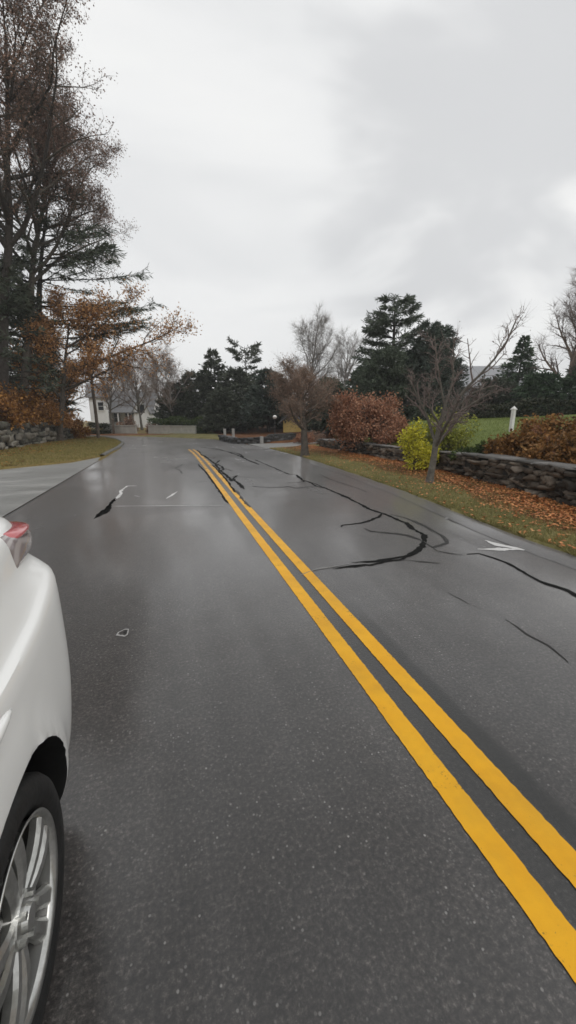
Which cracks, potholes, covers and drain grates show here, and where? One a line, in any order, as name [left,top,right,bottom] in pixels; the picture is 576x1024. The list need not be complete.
crack [448,553,576,604]
crack [169,447,259,507]
crack [505,619,568,662]
